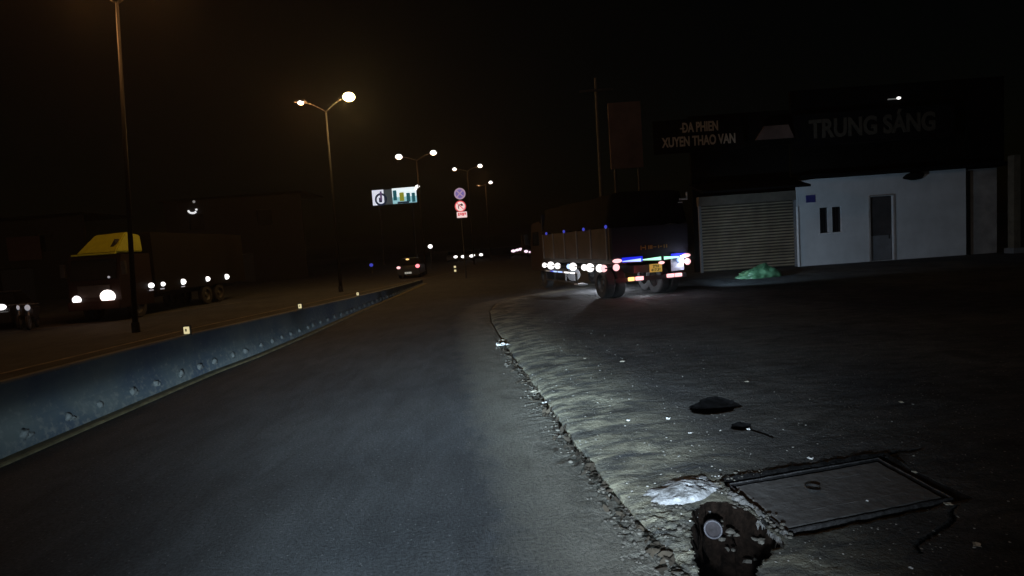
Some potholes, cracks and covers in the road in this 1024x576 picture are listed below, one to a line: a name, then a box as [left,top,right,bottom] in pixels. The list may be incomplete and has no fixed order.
crack [912,505,962,553]
manhole cover [716,453,976,539]
pothole [685,500,789,576]
